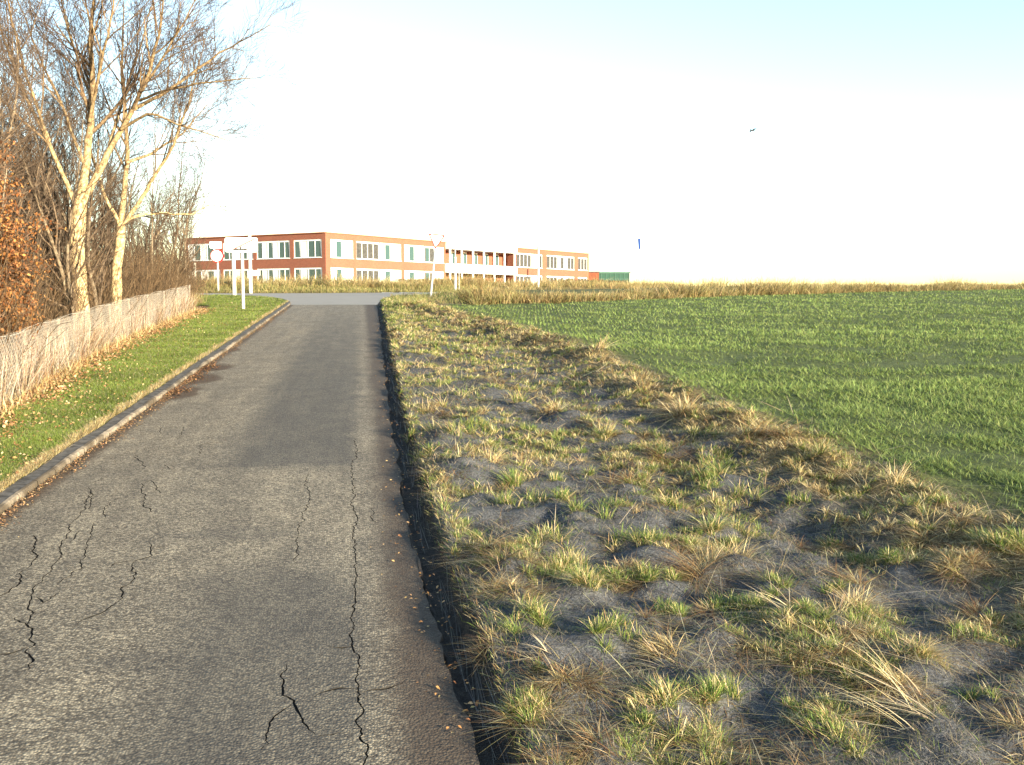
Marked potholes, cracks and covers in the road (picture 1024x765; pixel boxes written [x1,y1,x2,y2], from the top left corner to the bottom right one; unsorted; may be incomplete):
crack [261,439,402,765]
crack [78,542,166,623]
crack [0,477,119,670]
crack [134,454,170,511]
